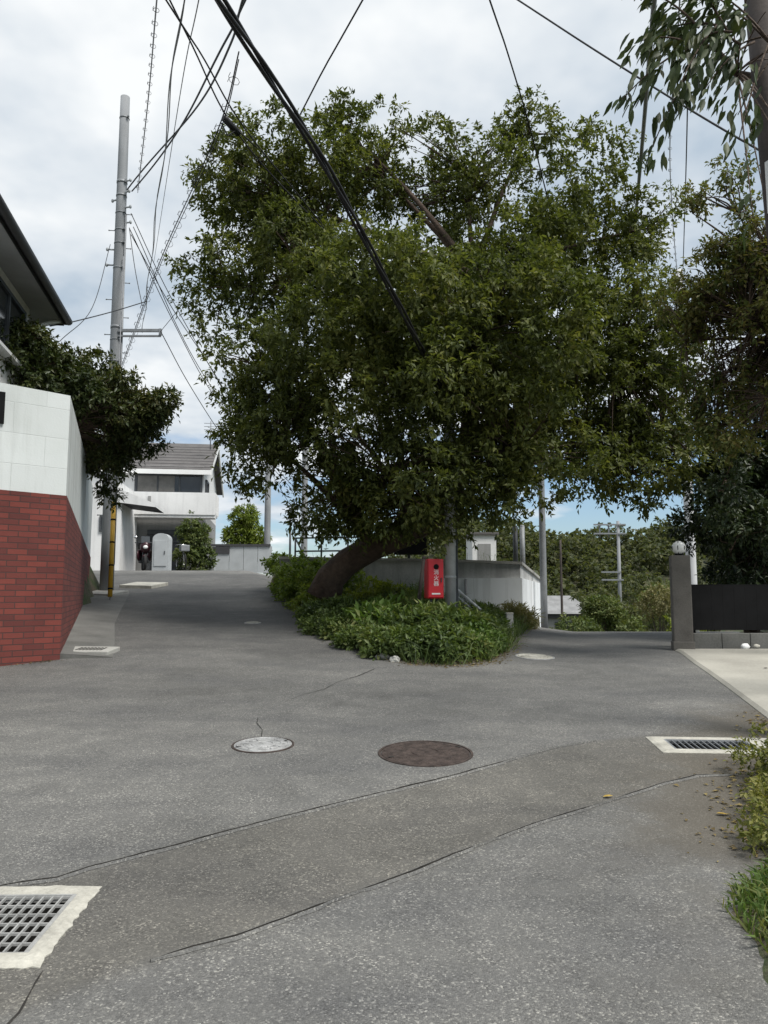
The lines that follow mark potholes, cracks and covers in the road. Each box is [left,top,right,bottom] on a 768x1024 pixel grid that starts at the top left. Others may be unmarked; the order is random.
manhole cover [378,740,473,767]
crack [7,971,43,1024]
drain grate [0,885,102,970]
drain grate [646,736,766,754]
manhole cover [231,737,294,754]
